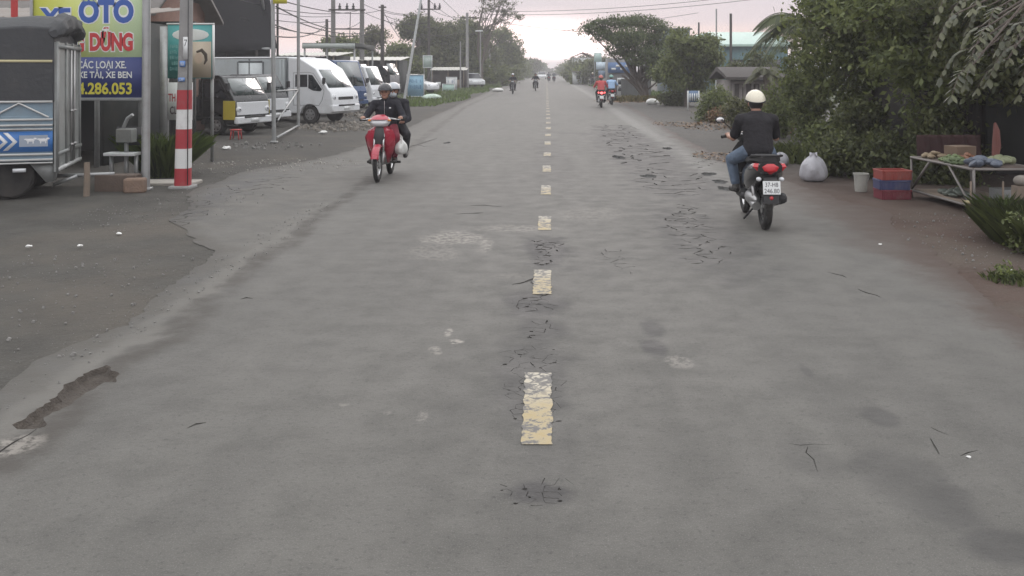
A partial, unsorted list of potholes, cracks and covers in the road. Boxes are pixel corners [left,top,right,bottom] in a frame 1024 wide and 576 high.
pothole [13,365,119,429]
crack [596,125,731,264]
crack [502,240,565,423]
crack [500,478,574,506]
